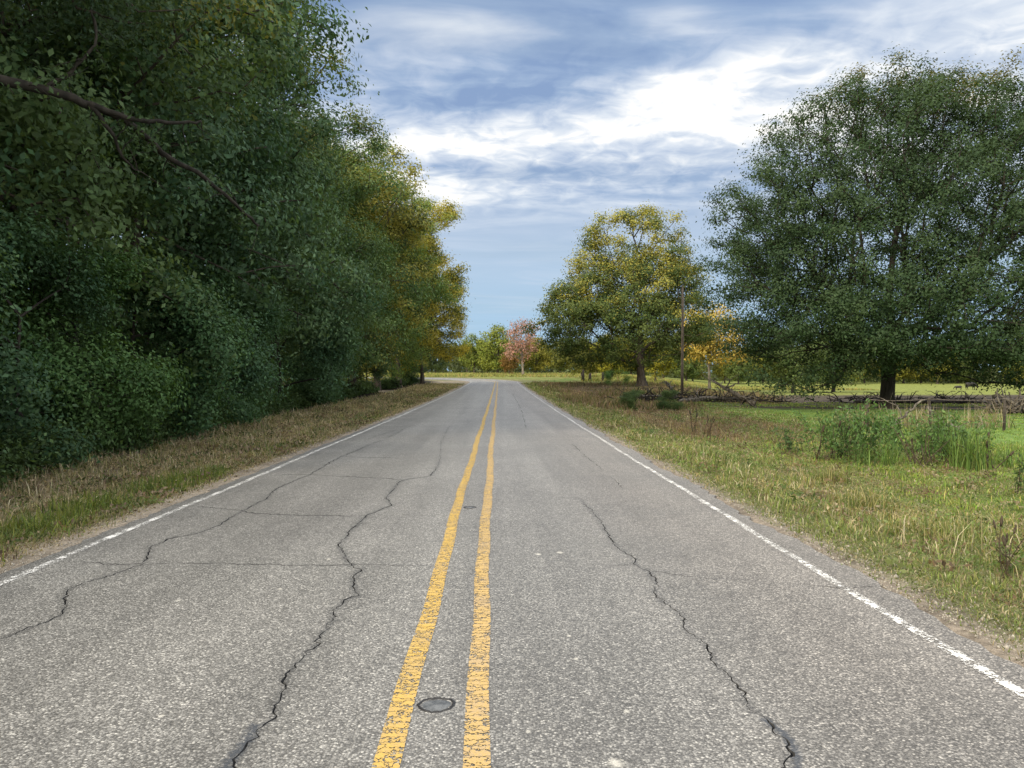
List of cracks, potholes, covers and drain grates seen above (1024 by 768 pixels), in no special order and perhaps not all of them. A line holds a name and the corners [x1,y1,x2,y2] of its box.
crack [0,429,441,768]
crack [586,506,795,768]
